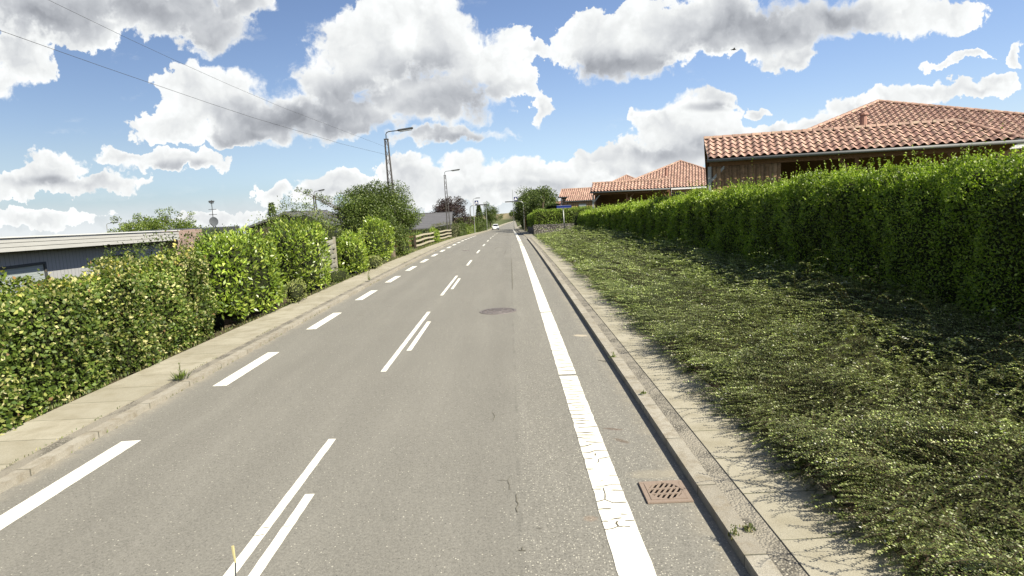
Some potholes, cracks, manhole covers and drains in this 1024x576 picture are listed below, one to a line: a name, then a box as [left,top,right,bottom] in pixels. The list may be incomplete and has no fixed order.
drain grate [638,480,694,504]
